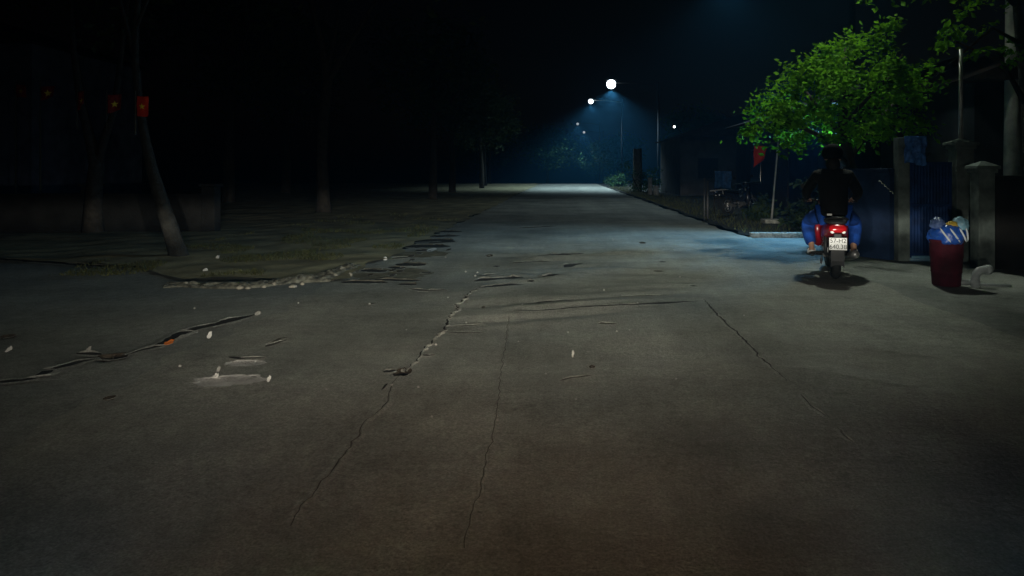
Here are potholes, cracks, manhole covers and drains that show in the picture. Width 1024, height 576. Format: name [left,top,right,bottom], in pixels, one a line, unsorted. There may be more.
pothole [389,250,457,258]
pothole [351,267,441,280]
crack [447,251,700,549]
crack [0,313,402,526]
